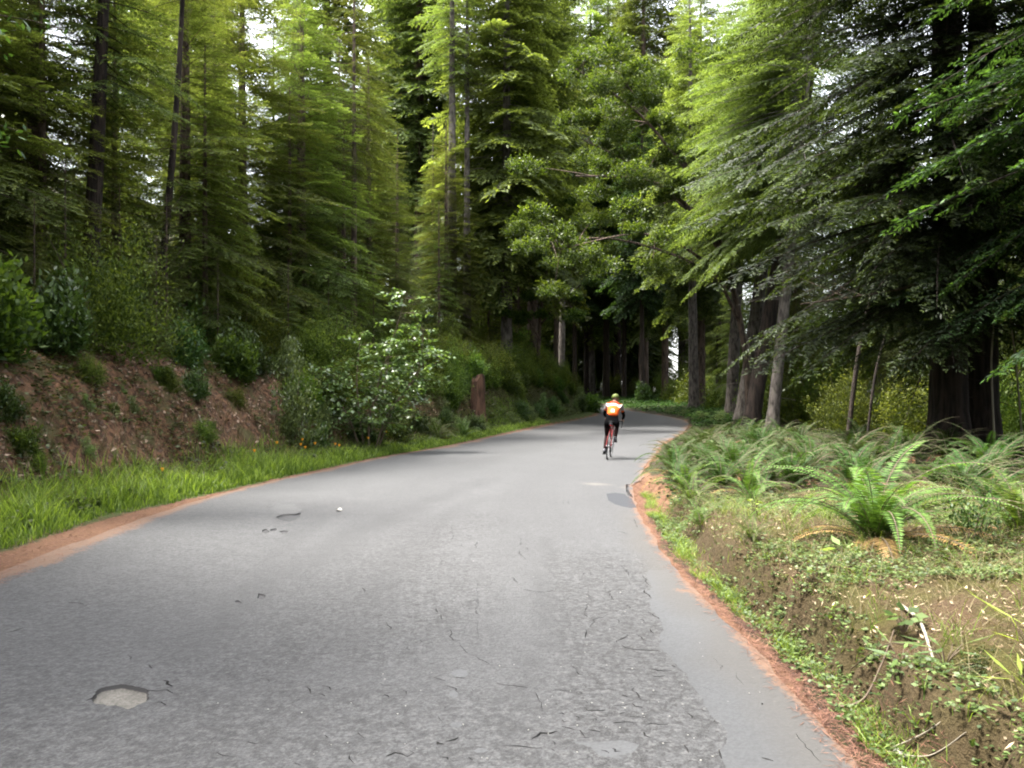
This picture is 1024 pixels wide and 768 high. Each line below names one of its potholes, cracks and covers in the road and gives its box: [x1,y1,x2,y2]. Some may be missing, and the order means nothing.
pothole [276,513,301,521]
crack [498,566,686,753]
pothole [92,684,150,709]
crack [434,677,481,762]
